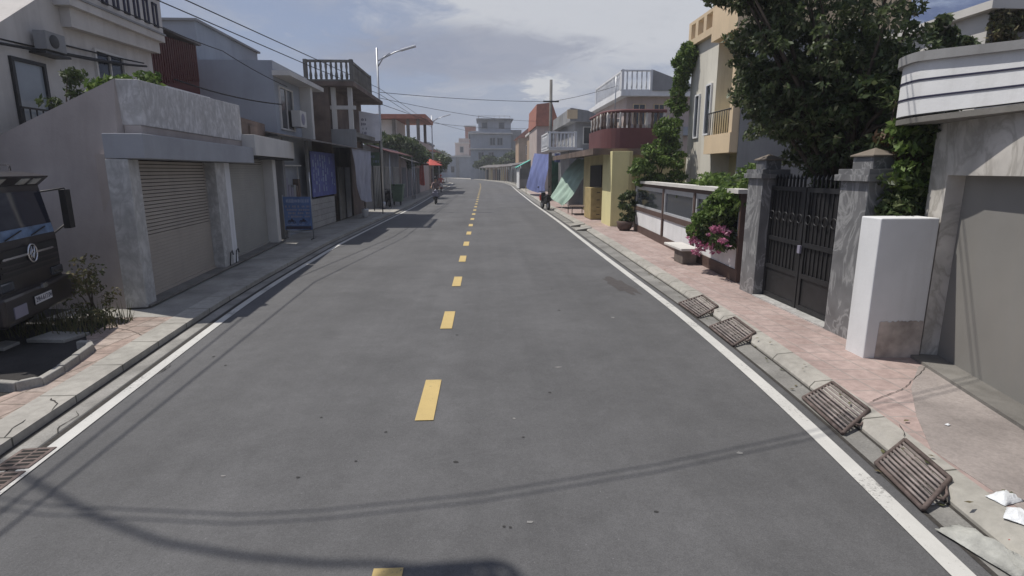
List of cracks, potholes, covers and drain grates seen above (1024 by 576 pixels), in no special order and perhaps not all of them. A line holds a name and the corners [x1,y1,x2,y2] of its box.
drain grate [678,294,719,318]
drain grate [801,381,871,435]
drain grate [874,438,953,512]
drain grate [709,316,757,347]
